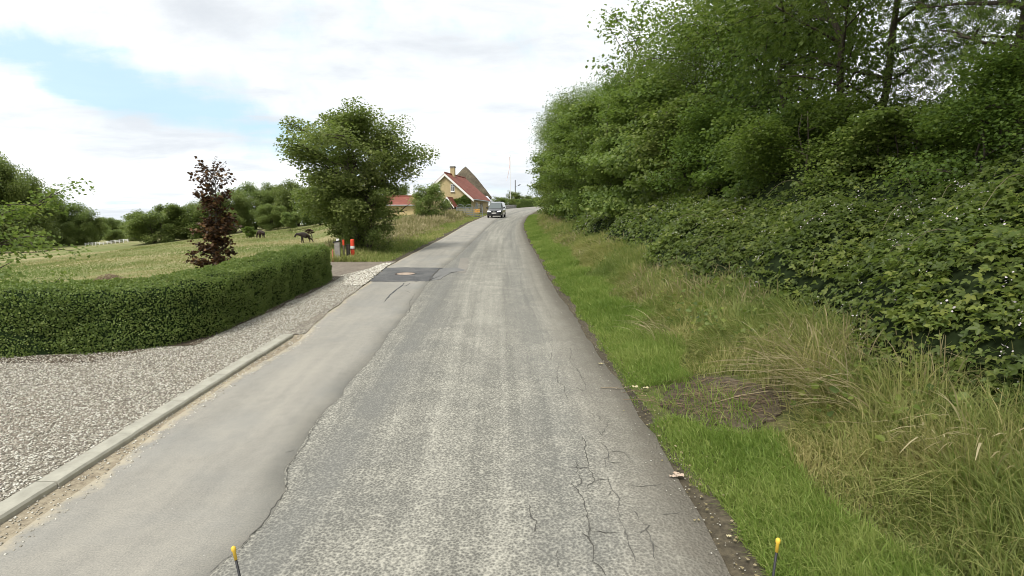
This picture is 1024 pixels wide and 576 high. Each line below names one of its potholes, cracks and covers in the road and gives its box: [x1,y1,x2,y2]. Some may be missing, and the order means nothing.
crack [550,348,587,399]
crack [571,416,679,574]
